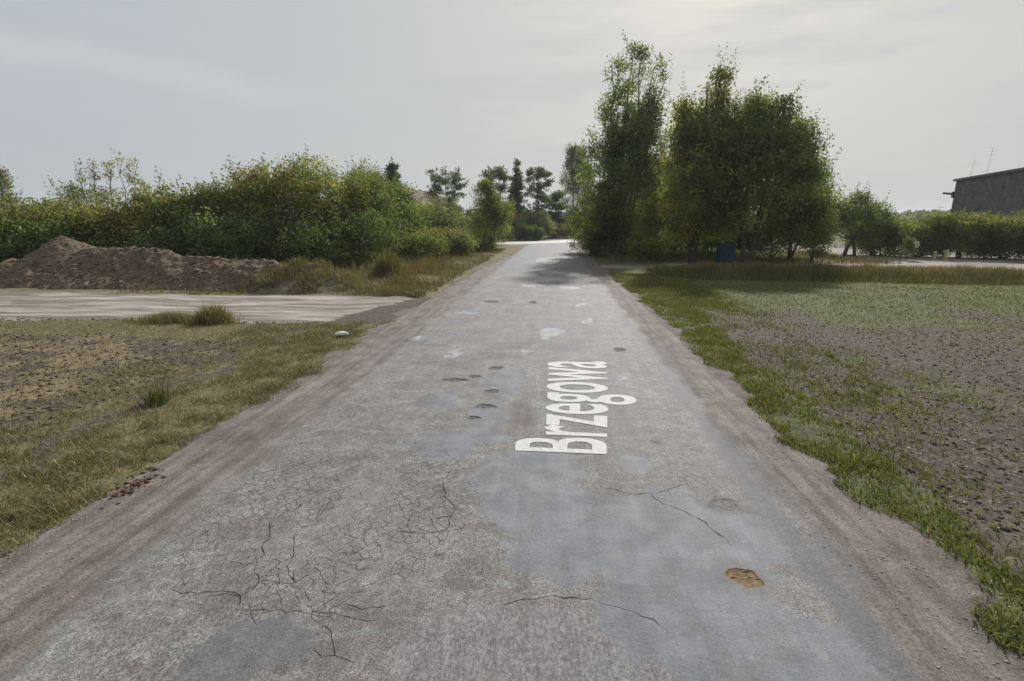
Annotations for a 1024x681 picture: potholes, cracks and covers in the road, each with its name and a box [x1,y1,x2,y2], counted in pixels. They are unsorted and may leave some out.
pothole [725,568,765,588]
crack [503,595,666,630]
crack [604,484,727,540]
crack [172,438,479,663]
